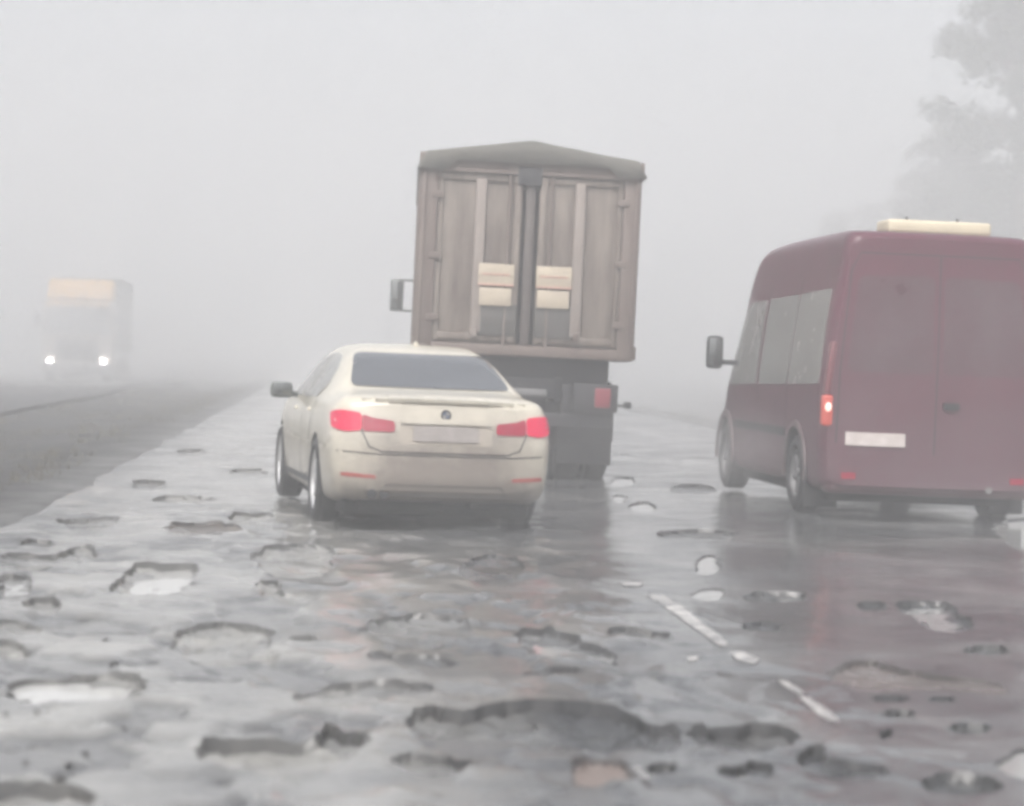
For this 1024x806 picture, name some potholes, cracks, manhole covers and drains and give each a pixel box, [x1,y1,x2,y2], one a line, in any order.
pothole [894,600,975,632]
pothole [193,722,372,772]
pothole [570,754,637,787]
pothole [824,660,1010,695]
pothole [920,771,1005,796]
pothole [512,626,618,666]
pothole [3,671,149,705]
pothole [169,621,286,668]
pothole [131,479,167,490]
pothole [796,743,891,780]
pothole [162,521,244,535]
pothole [693,555,723,575]
